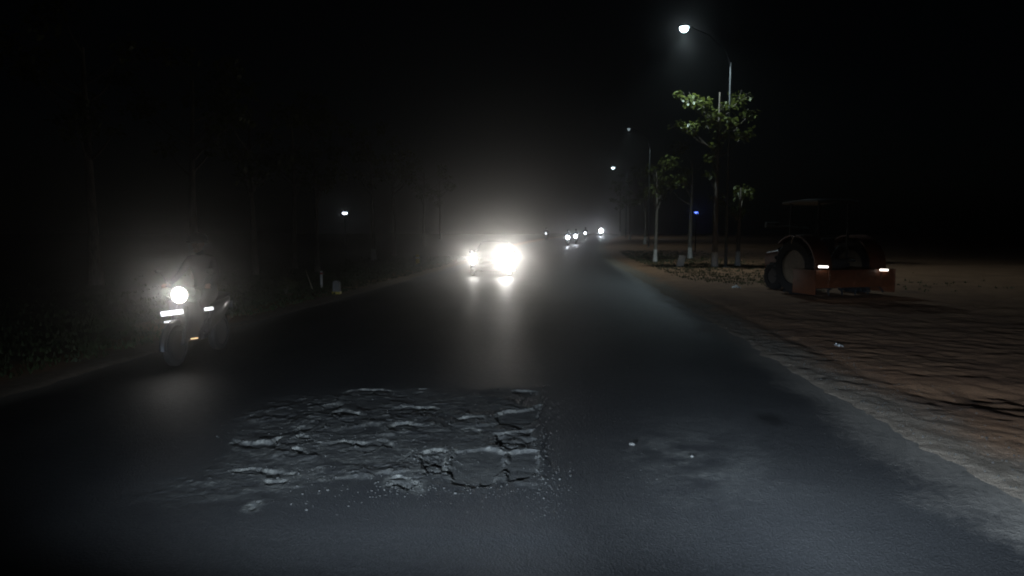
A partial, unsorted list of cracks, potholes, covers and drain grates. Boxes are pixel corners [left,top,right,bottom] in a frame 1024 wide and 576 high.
pothole [382,474,425,494]
pothole [229,436,286,457]
pothole [417,448,450,474]
pothole [244,500,262,512]
pothole [317,438,400,453]
pothole [460,427,483,435]
pothole [446,446,507,489]
pothole [388,421,426,430]
pothole [344,388,428,398]
pothole [492,404,543,430]
pothole [498,449,541,482]
pothole [510,389,541,397]
